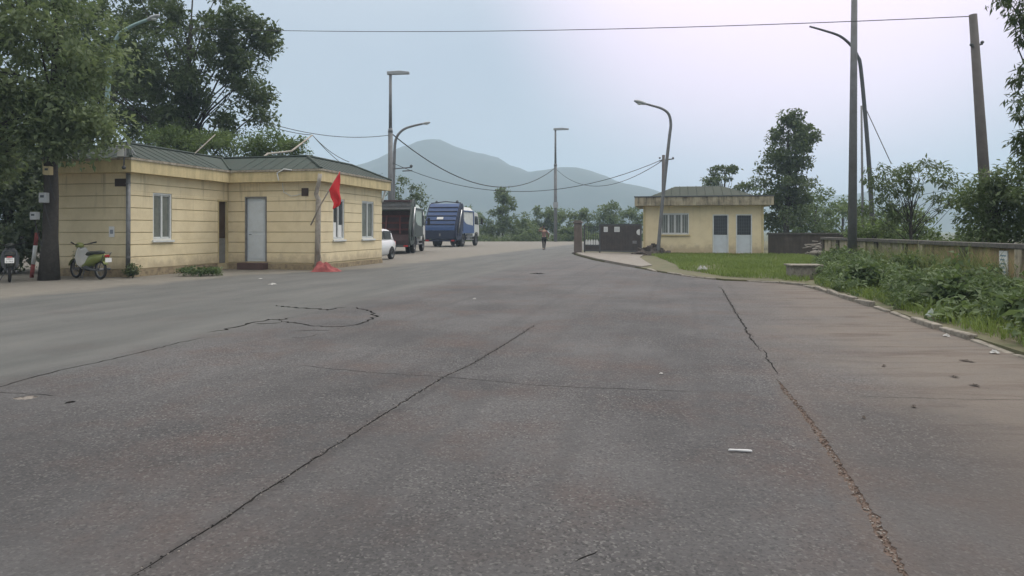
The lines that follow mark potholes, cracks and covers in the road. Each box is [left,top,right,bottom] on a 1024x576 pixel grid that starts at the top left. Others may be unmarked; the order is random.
crack [131,326,690,576]
crack [212,305,379,338]
crack [719,287,1003,576]
